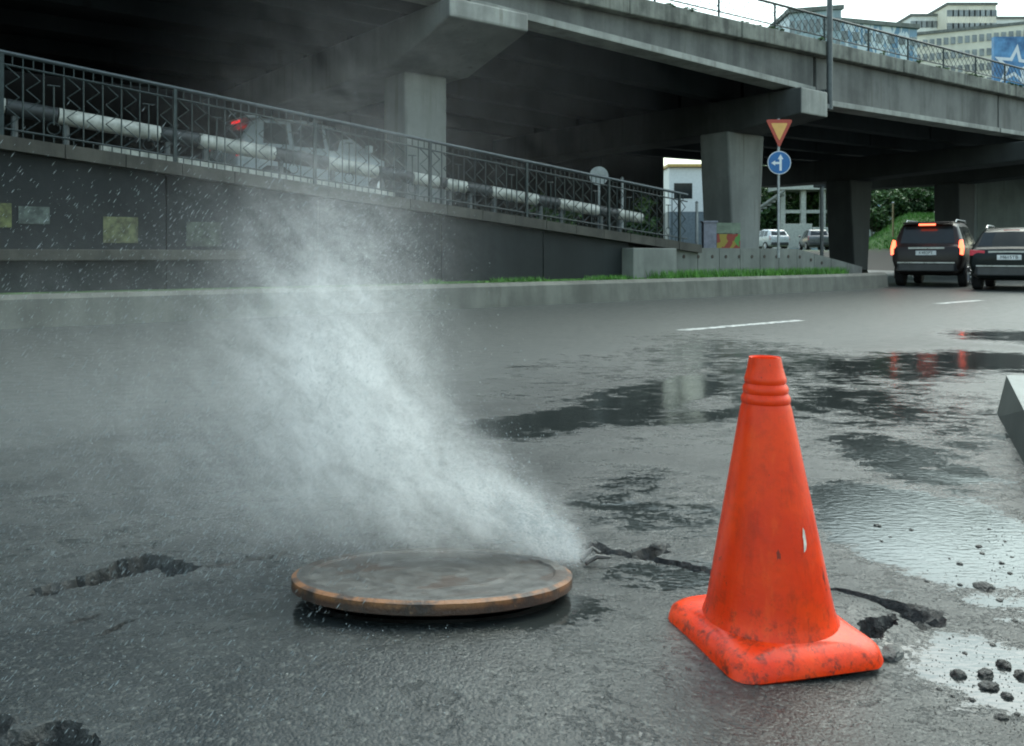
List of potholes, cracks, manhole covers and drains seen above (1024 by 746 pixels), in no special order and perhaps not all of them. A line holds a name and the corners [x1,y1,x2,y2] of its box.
manhole cover [291,548,572,617]
pothole [26,553,202,597]
pothole [857,613,899,639]
pothole [0,714,101,746]
crack [67,612,137,637]
crack [580,541,711,574]
